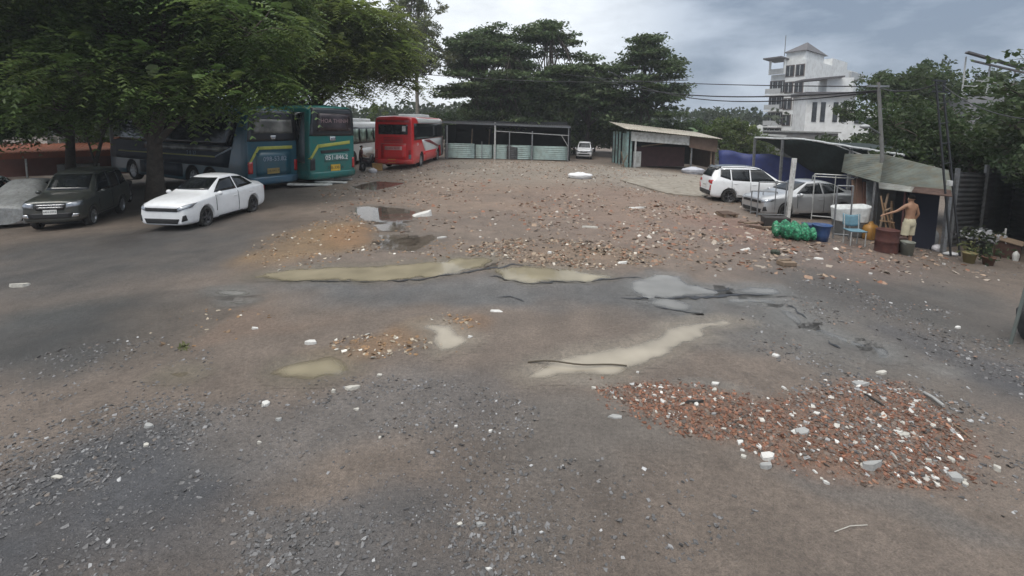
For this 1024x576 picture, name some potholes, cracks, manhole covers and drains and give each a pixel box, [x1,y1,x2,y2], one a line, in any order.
pothole [240,252,509,285]
pothole [506,312,760,389]
pothole [484,261,621,286]
pothole [347,180,409,191]
pothole [371,205,423,225]
pothole [370,232,448,253]
pothole [348,204,389,223]
pothole [620,269,735,301]
